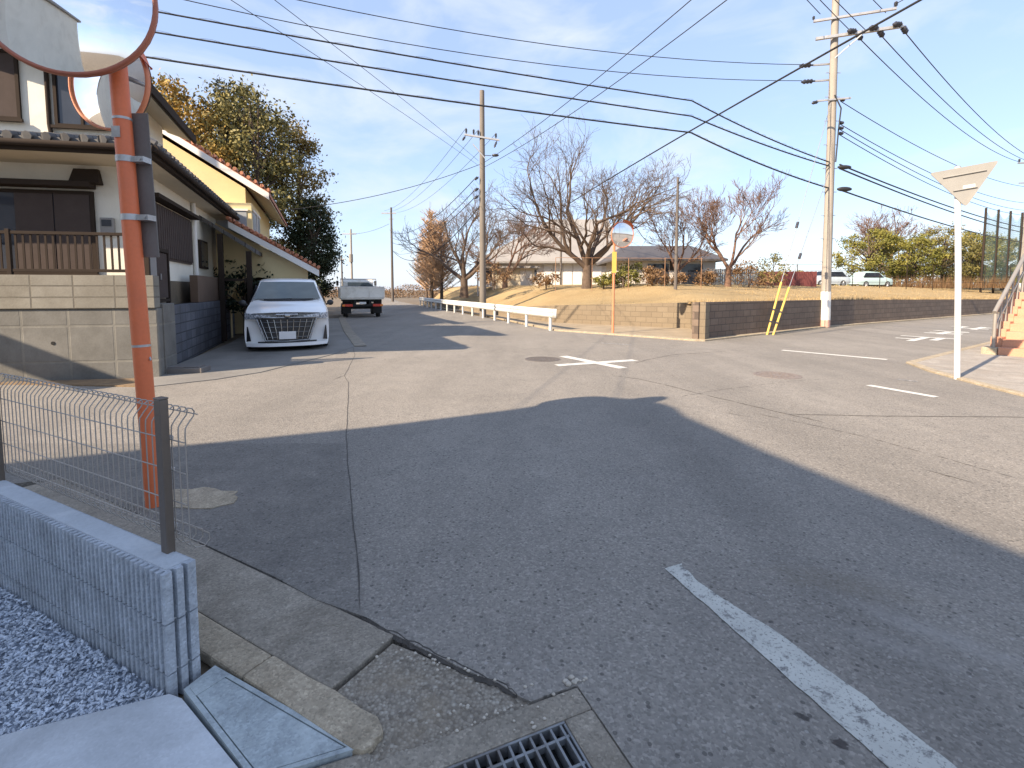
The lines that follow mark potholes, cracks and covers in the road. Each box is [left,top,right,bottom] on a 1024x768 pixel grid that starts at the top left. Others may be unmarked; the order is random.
drain grate [362,688,631,768]
manhole cover [753,371,802,379]
crack [333,349,517,698]
